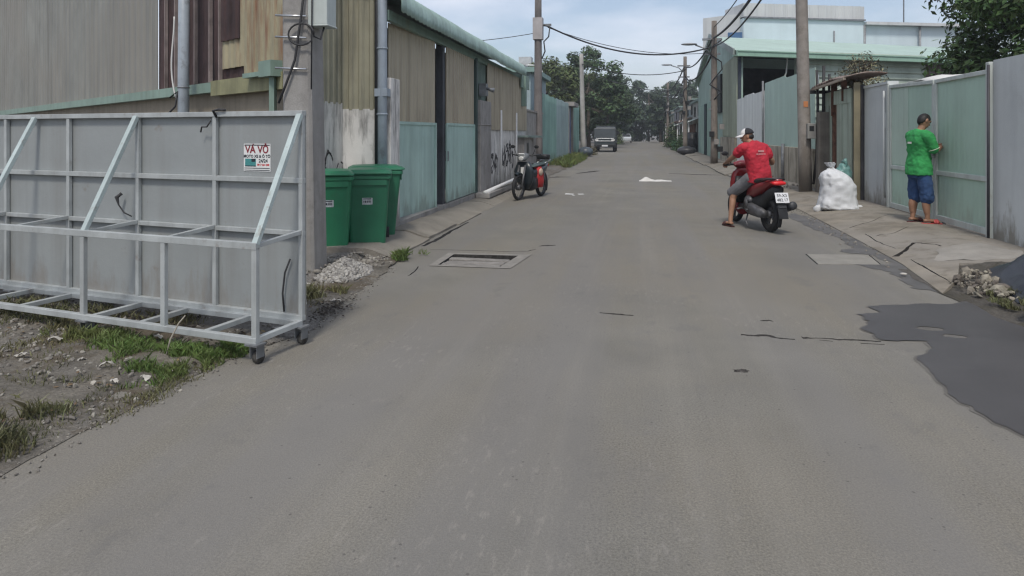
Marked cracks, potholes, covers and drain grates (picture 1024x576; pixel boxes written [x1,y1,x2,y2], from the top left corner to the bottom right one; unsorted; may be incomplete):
crack [741,320,885,345]
crack [877,227,941,257]
manhole cover [805,254,880,265]
